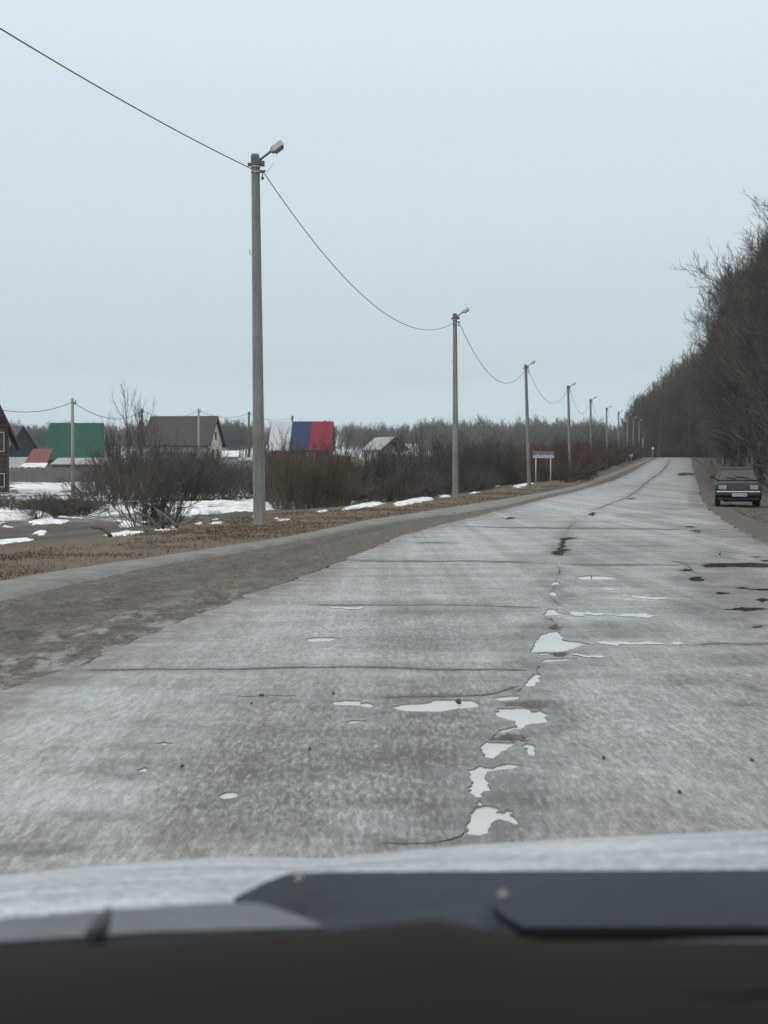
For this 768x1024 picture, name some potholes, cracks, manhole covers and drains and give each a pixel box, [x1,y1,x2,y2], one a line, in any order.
pothole [524,672,542,686]
crack [379,803,478,844]
pothole [465,800,521,835]
pothole [391,699,480,712]
pothole [522,742,536,756]
pothole [530,631,590,652]
pothole [466,763,522,800]
pothole [217,791,239,799]
pothole [480,741,515,758]
pothole [495,707,551,733]
